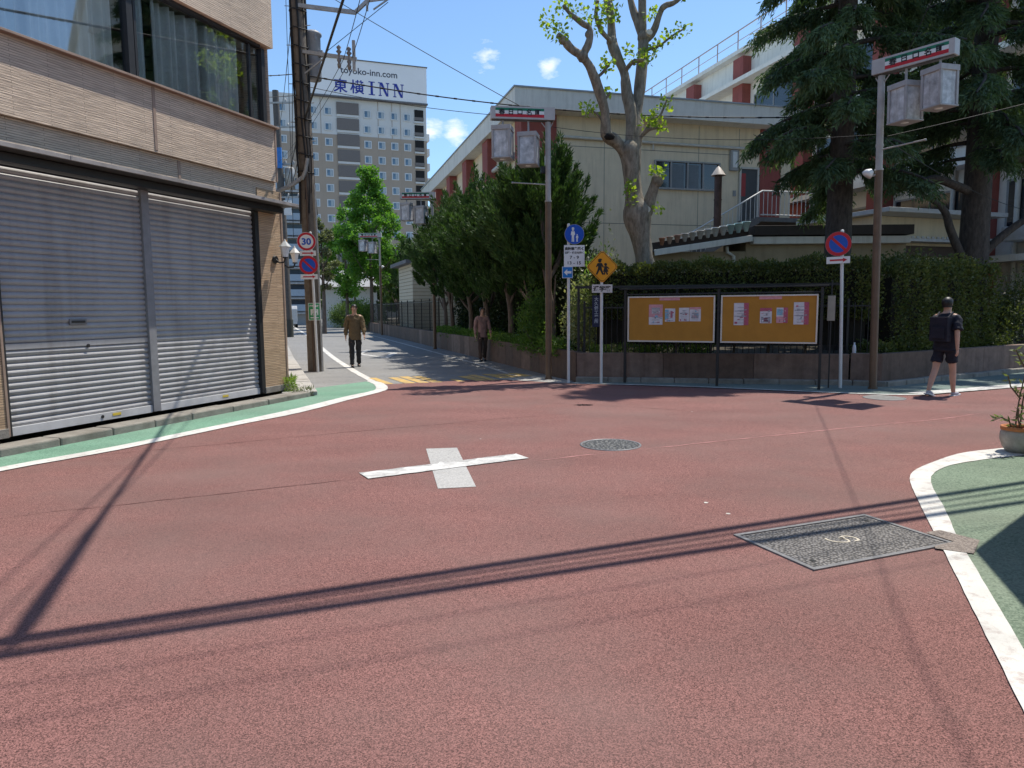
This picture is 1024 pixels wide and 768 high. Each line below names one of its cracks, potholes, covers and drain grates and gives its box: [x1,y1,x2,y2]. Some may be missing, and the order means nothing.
manhole cover [733,514,952,571]
manhole cover [580,439,641,451]
